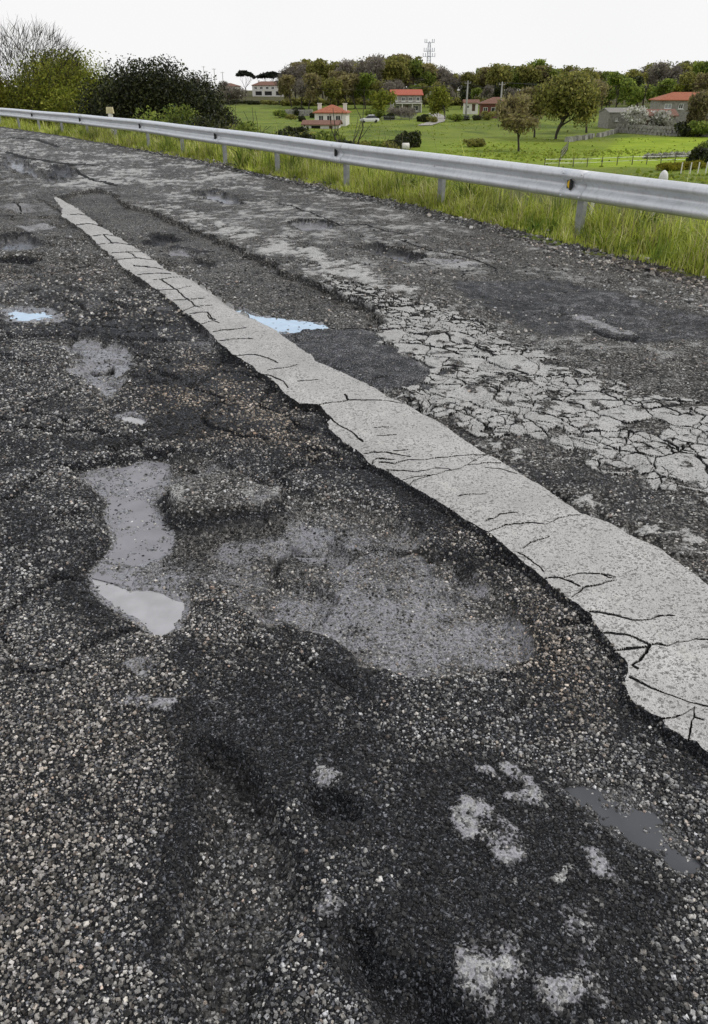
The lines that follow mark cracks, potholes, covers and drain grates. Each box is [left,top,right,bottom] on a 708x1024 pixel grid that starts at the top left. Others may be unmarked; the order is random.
pothole [0,231,48,250]
pothole [561,780,706,874]
pothole [58,187,389,335]
crack [279,204,498,270]
crack [283,273,708,494]
pothole [77,448,549,685]
pothole [0,295,74,325]
pothole [36,333,150,403]
